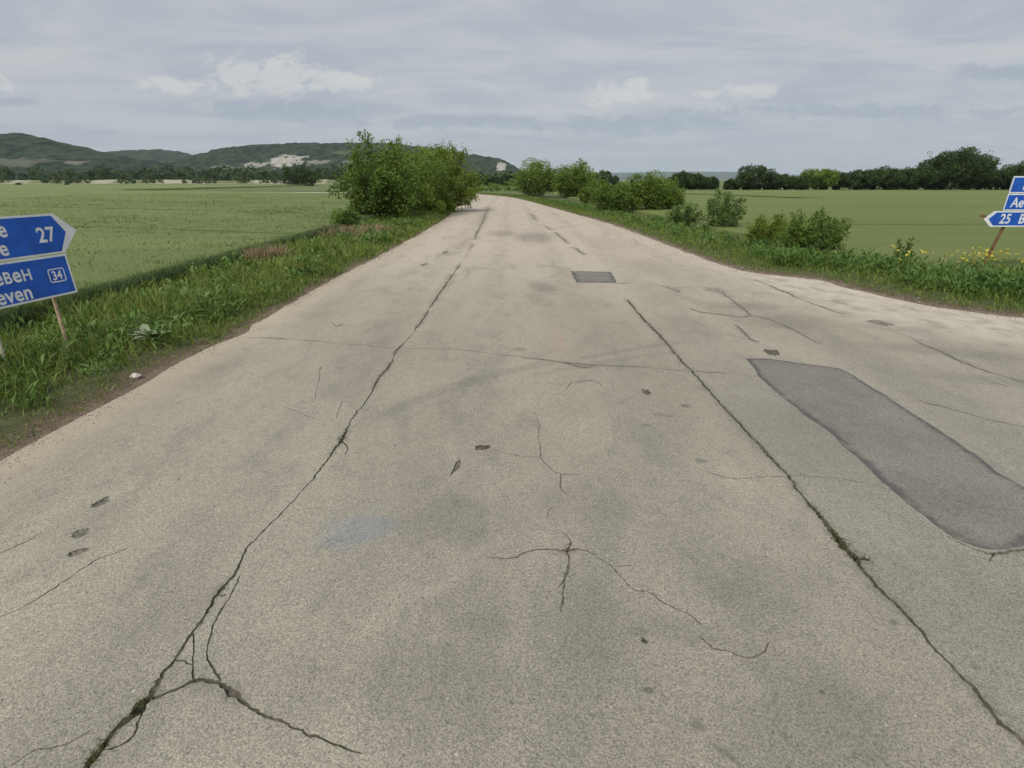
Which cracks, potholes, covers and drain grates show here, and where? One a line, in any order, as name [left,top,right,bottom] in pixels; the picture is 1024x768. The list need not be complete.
crack [618,280,843,345]
pothole [71,528,90,539]
crack [919,400,1024,427]
crack [709,472,895,492]
pothole [90,496,110,508]
crack [947,536,1024,563]
crack [888,328,1022,387]
crack [486,412,769,659]
